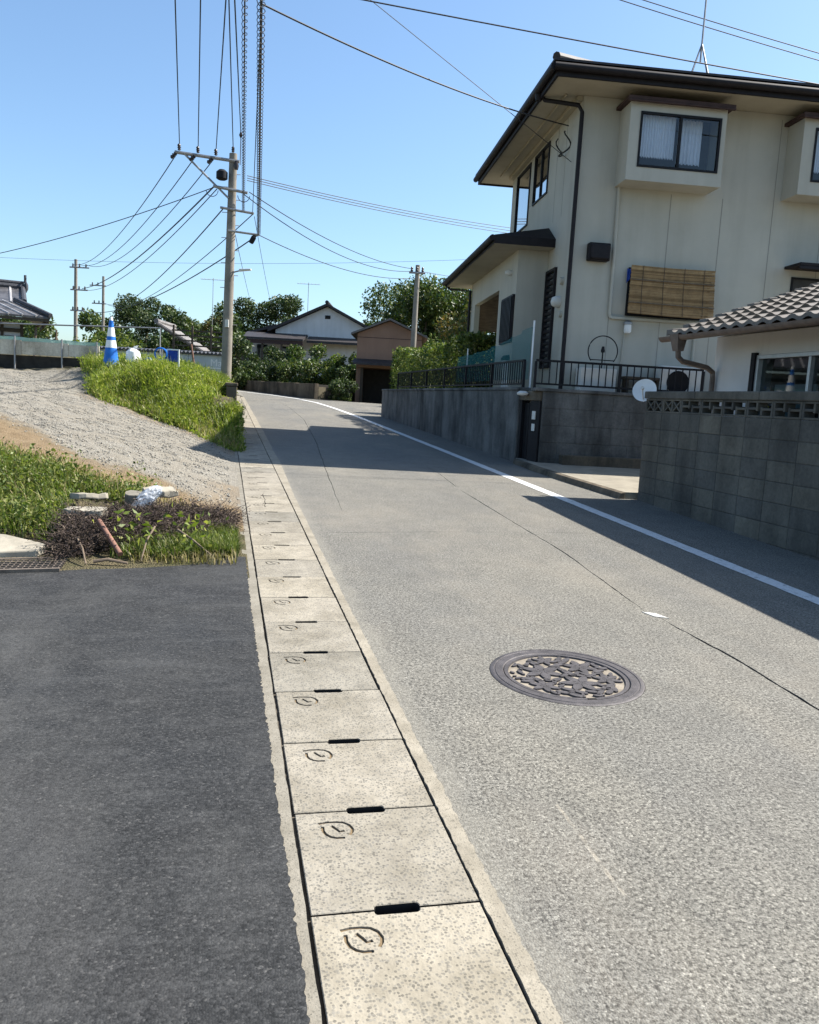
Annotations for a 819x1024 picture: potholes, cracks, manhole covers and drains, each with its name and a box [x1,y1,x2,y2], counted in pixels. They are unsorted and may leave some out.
drain grate [0,556,68,573]
manhole cover [490,649,645,707]
